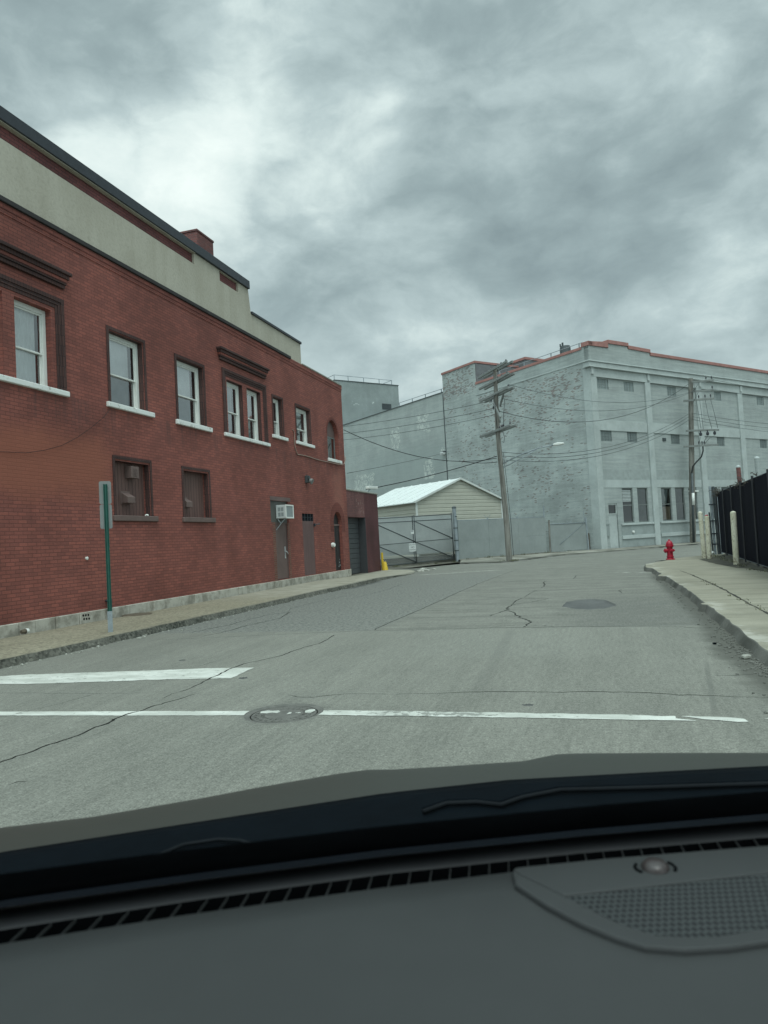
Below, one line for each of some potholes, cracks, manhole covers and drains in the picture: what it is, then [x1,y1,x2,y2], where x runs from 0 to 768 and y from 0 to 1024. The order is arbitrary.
crack [0,635,334,763]
crack [481,582,549,627]
manhole cover [244,703,324,723]
